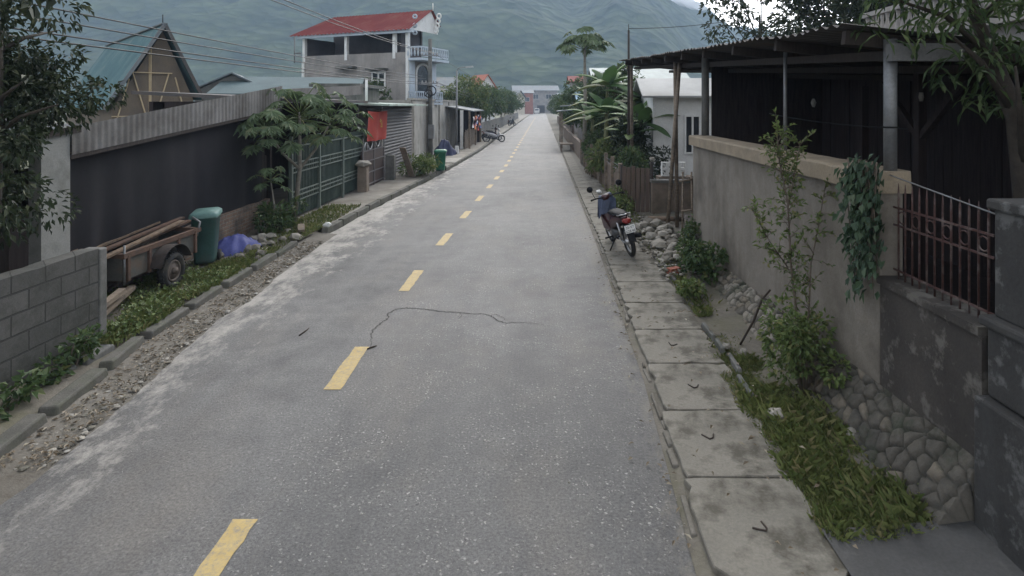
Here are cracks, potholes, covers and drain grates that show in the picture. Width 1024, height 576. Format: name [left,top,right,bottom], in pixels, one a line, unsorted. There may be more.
crack [370,307,546,347]
